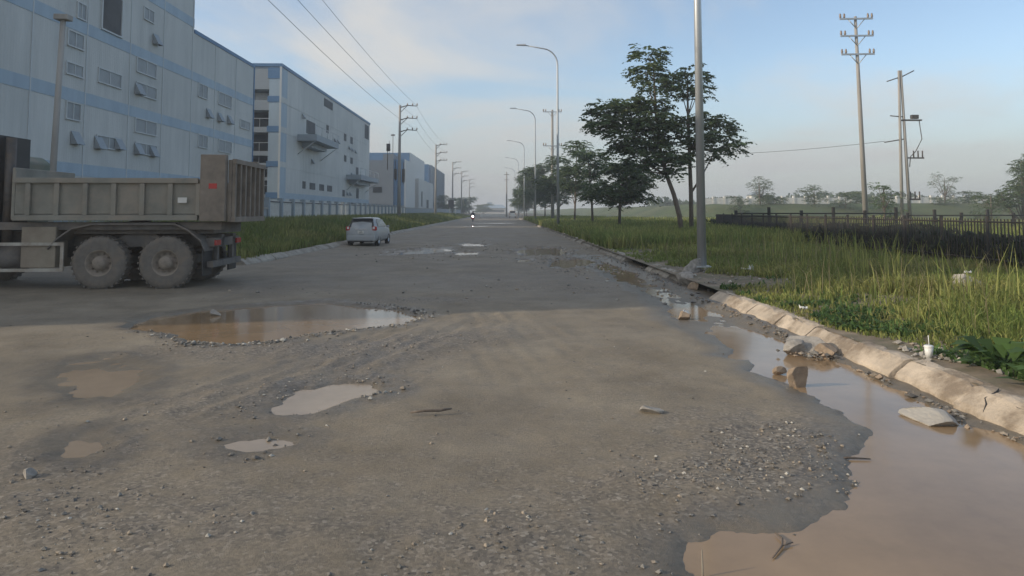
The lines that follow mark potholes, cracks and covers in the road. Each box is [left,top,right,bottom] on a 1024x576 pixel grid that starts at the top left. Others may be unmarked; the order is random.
pothole [513,246,578,256]
pothole [37,429,122,467]
pothole [546,258,596,268]
pothole [264,377,401,416]
pothole [216,434,300,454]
pothole [119,300,424,344]
pothole [380,247,459,256]
pothole [34,353,162,403]
